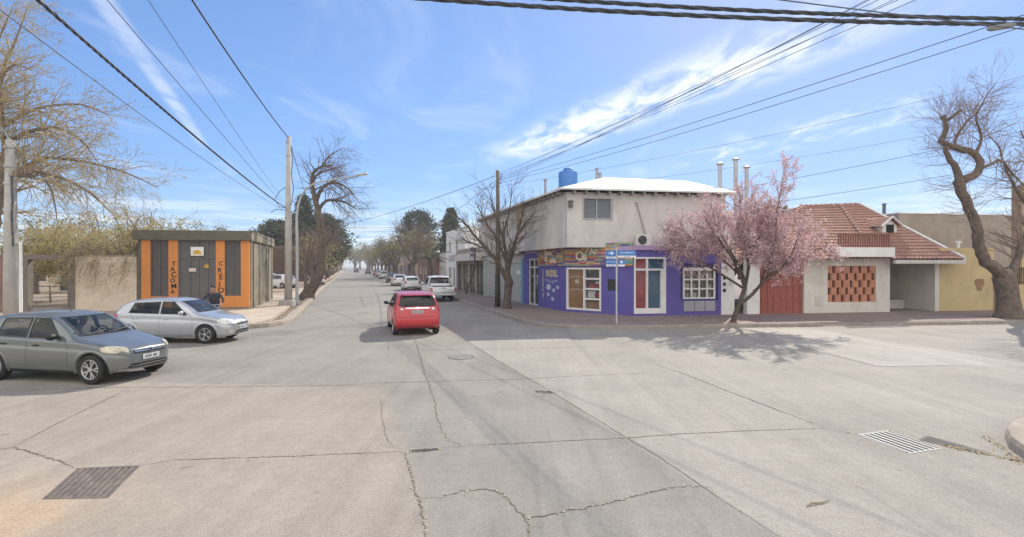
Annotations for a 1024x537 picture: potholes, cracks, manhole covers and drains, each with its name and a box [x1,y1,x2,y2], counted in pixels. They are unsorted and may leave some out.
crack [0,447,75,468]
crack [414,341,460,447]
drain grate [857,430,943,454]
crack [381,405,712,537]
drain grate [43,465,140,499]
